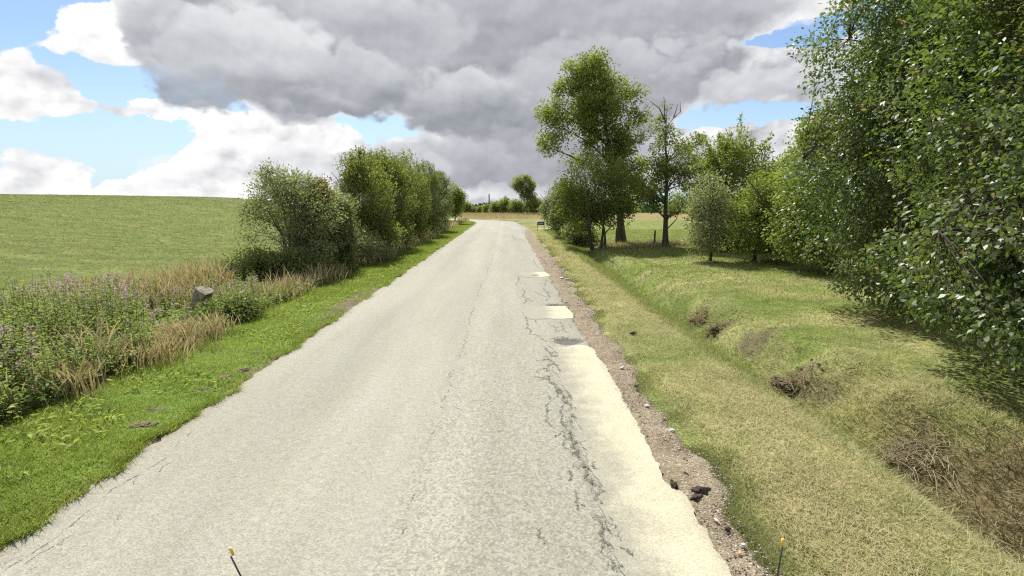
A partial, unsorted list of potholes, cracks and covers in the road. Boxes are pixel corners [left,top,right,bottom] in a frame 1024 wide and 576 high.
crack [440,259,493,409]
crack [515,256,634,571]
crack [4,430,192,570]
